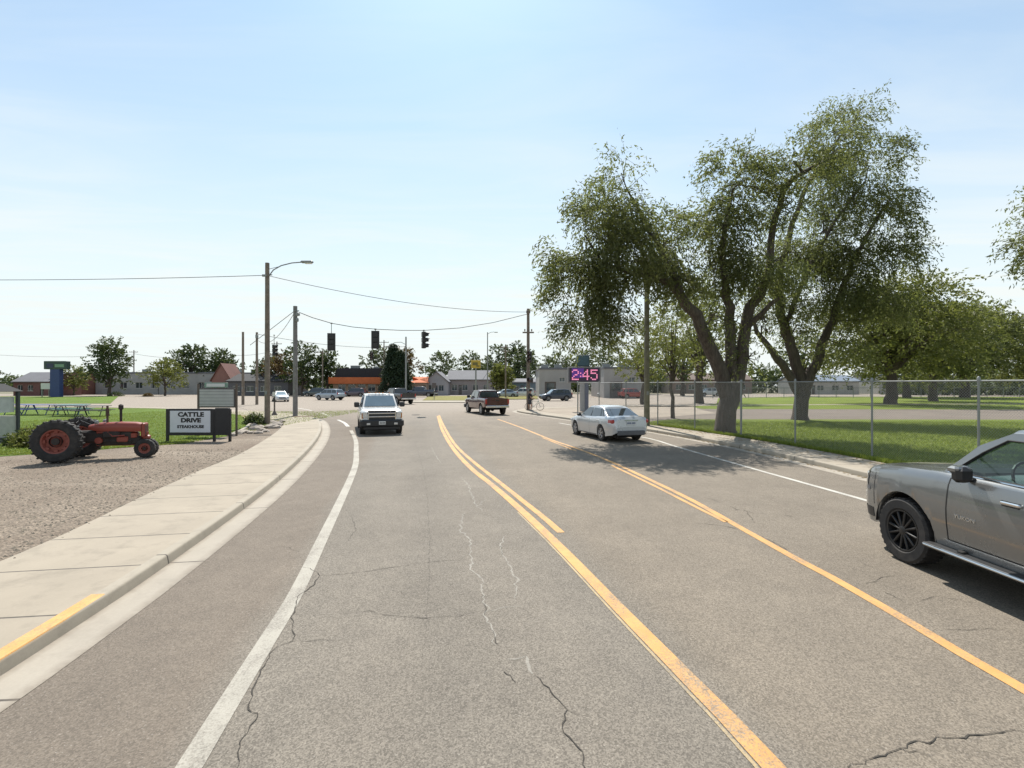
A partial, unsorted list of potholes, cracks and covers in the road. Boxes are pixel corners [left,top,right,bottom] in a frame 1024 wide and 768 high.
crack [237,452,585,768]
crack [848,729,1020,767]
